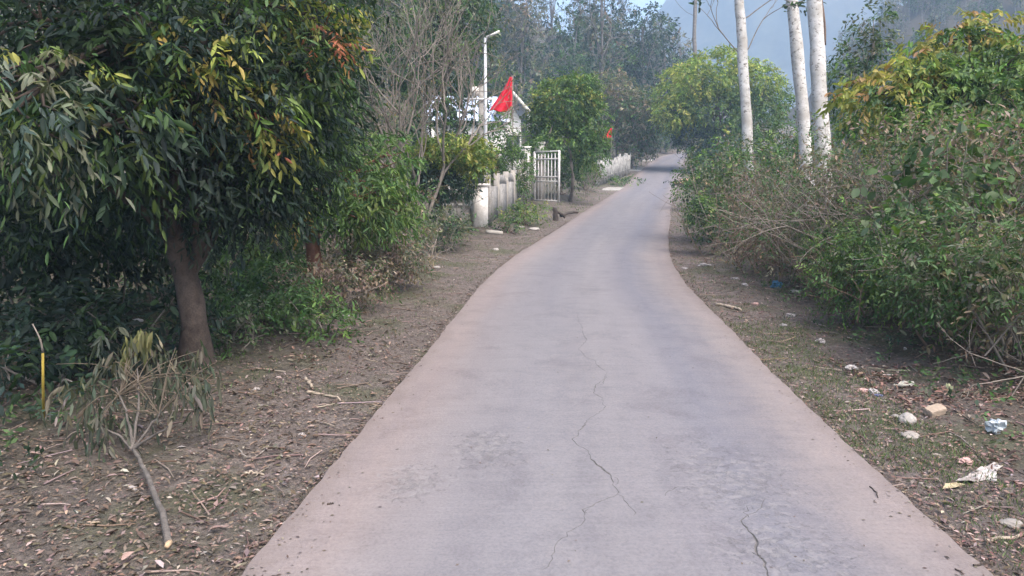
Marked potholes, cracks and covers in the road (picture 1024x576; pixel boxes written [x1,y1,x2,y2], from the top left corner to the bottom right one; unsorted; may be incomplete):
crack [741,499,769,576]
crack [544,313,636,569]
